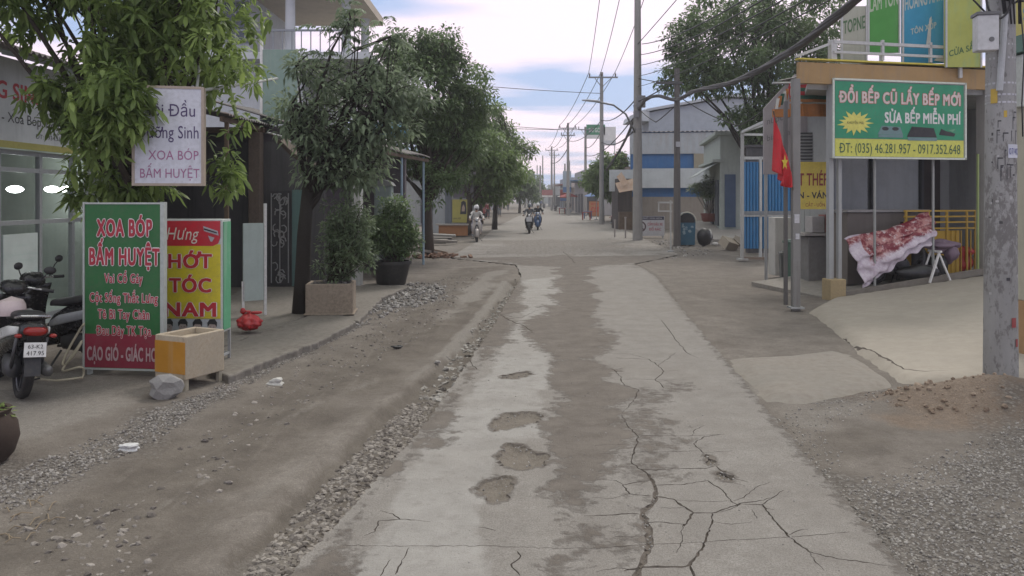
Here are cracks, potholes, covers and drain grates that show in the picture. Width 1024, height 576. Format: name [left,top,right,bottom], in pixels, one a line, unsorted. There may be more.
pothole [474,475,514,502]
pothole [490,411,544,431]
crack [614,321,691,413]
crack [364,510,430,576]
crack [594,414,886,576]
pothole [496,442,551,471]
pothole [500,371,532,379]
